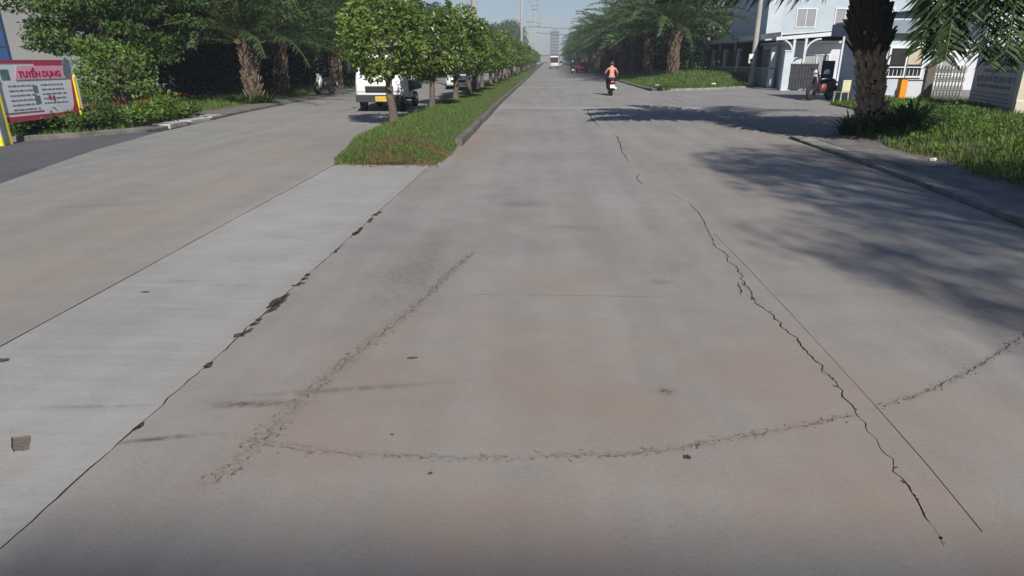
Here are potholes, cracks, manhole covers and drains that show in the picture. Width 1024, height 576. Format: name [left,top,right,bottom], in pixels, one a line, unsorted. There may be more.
crack [201,108,1024,546]
